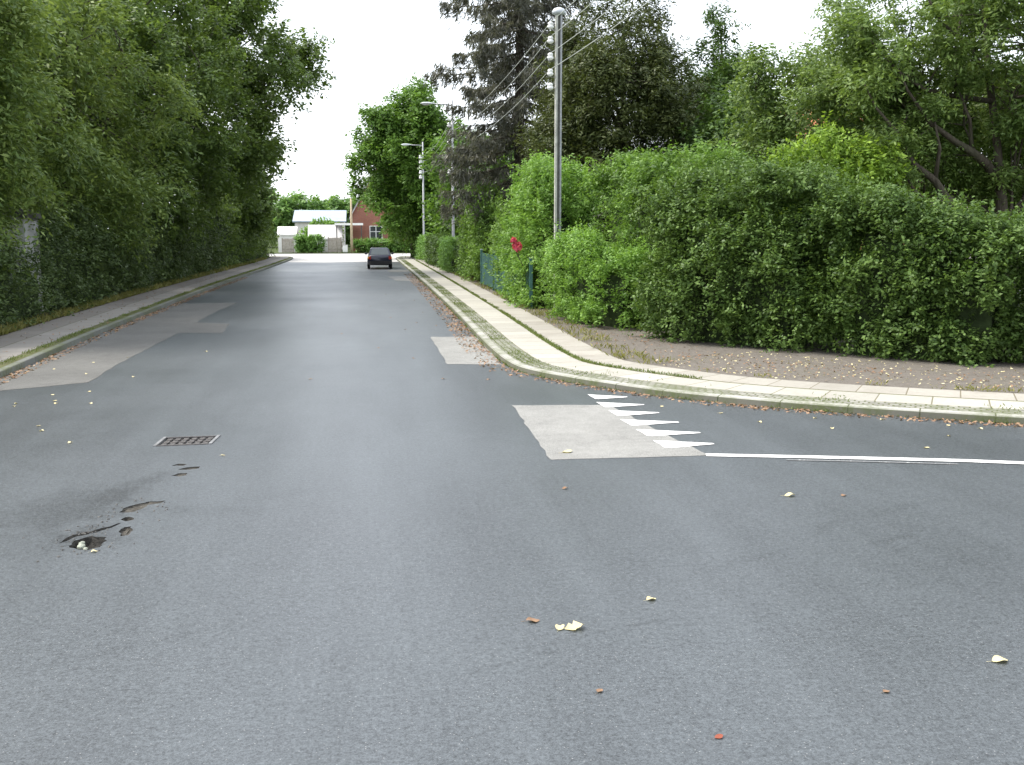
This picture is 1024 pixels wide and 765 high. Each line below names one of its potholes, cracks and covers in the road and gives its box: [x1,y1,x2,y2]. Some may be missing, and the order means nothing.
pothole [120,501,164,513]
pothole [69,536,107,550]
